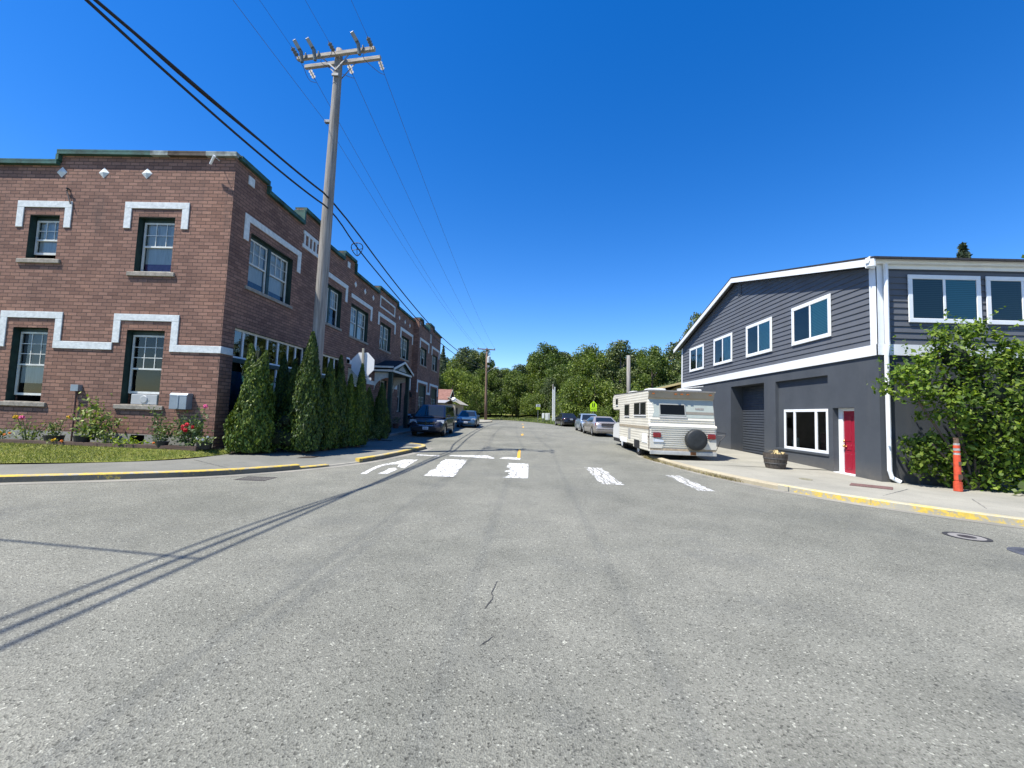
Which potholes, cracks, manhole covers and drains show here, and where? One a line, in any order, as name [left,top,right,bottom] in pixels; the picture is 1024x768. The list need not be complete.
manhole cover [942,532,993,542]
manhole cover [1006,547,1024,555]
